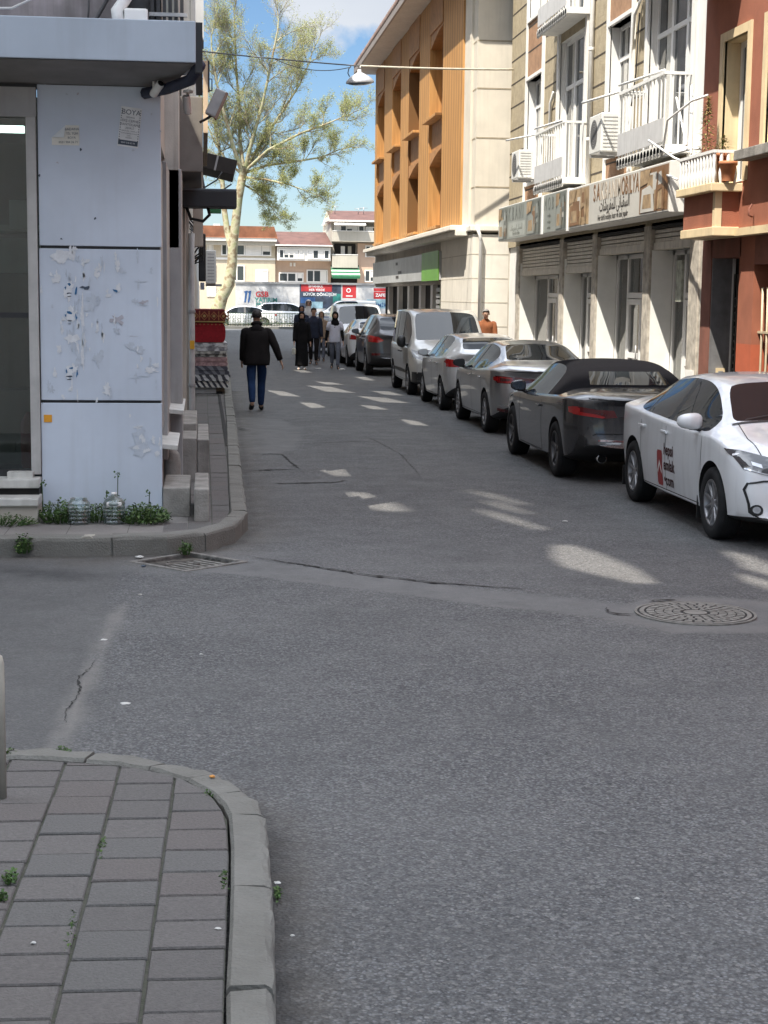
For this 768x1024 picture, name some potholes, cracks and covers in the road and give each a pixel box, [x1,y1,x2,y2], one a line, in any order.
manhole cover [634,601,757,626]
crack [64,660,95,722]
crack [264,438,421,484]
